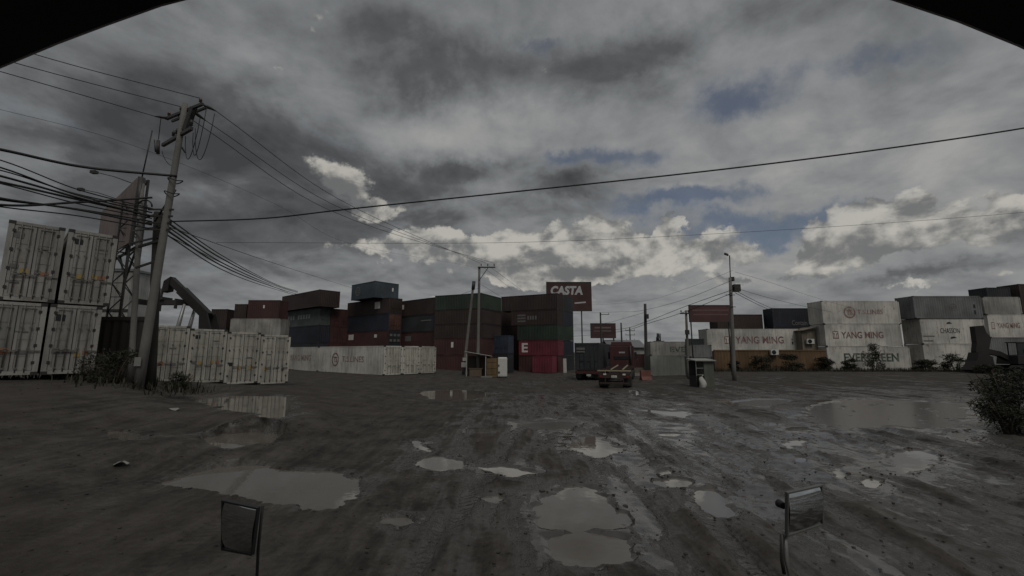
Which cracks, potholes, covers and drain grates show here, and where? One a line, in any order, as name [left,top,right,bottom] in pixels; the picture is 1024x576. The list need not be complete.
pothole [197,417,290,449]
pothole [799,398,984,429]
pothole [856,476,887,488]
pothole [473,463,545,477]
pothole [566,434,630,458]
pothole [690,484,739,518]
pothole [376,513,417,526]
pothole [412,454,468,471]
pothole [526,482,639,570]
pothole [180,393,302,418]
pothole [880,447,945,475]
pothole [649,475,696,487]
